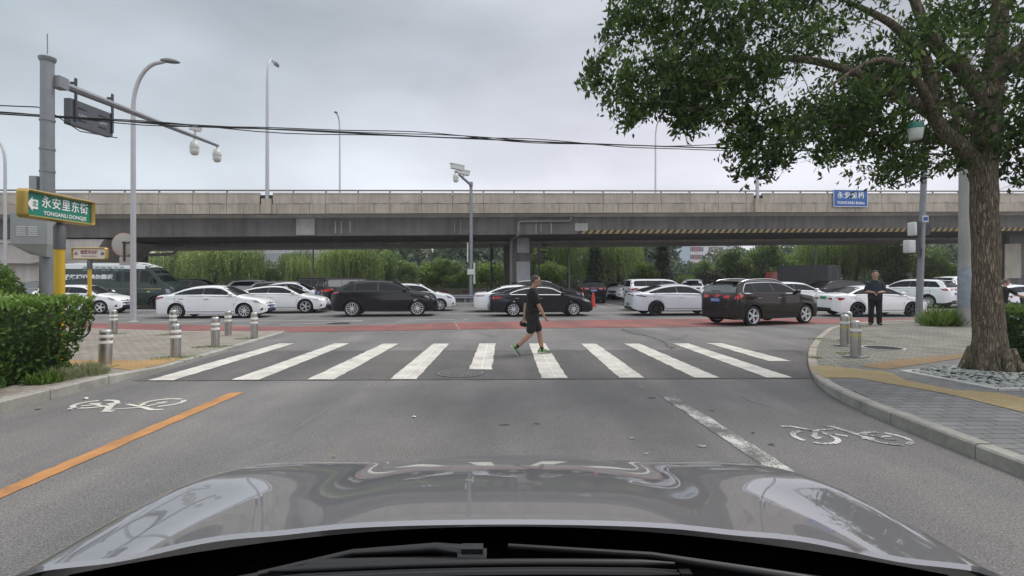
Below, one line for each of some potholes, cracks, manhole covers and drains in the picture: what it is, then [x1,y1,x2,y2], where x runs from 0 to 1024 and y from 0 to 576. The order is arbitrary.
manhole cover [437,369,484,378]
